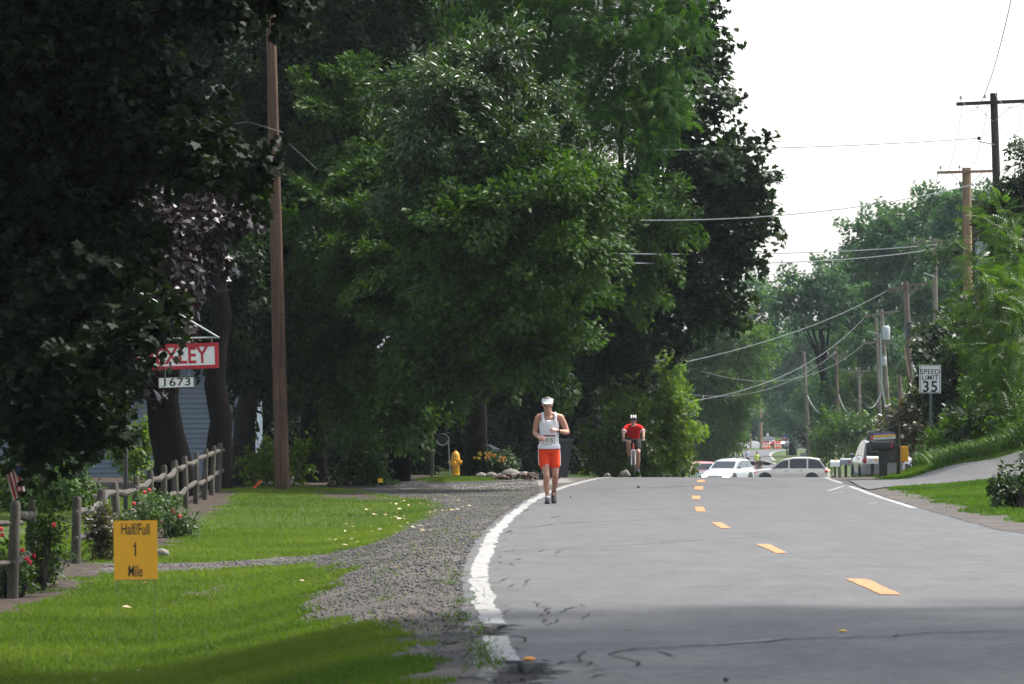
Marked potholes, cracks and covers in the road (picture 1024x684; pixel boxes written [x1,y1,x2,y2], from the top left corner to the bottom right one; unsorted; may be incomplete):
crack [538,630,1019,678]
